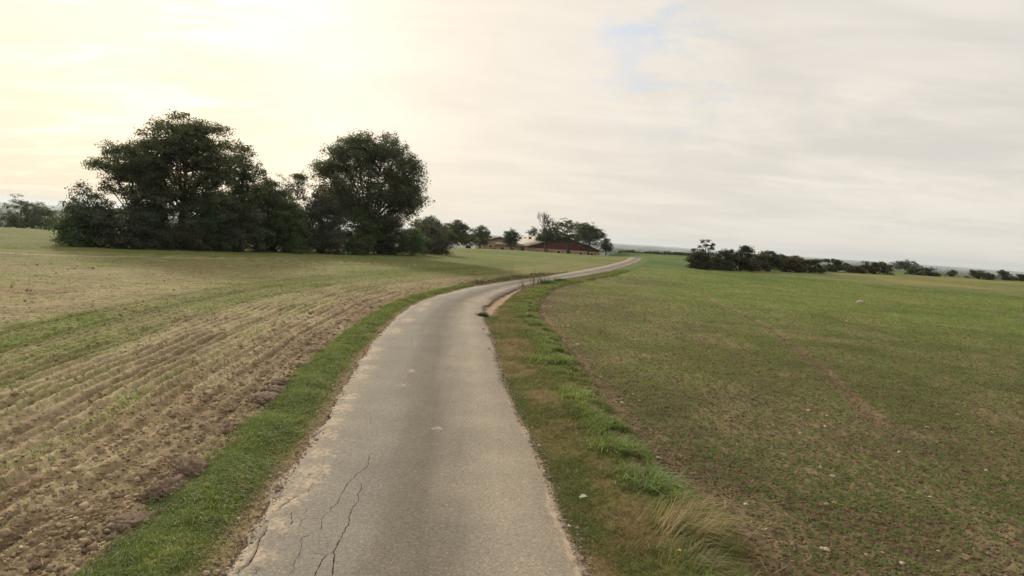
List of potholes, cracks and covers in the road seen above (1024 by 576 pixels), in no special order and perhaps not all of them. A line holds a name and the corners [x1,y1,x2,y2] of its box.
crack [283,454,370,576]
crack [230,515,268,576]
